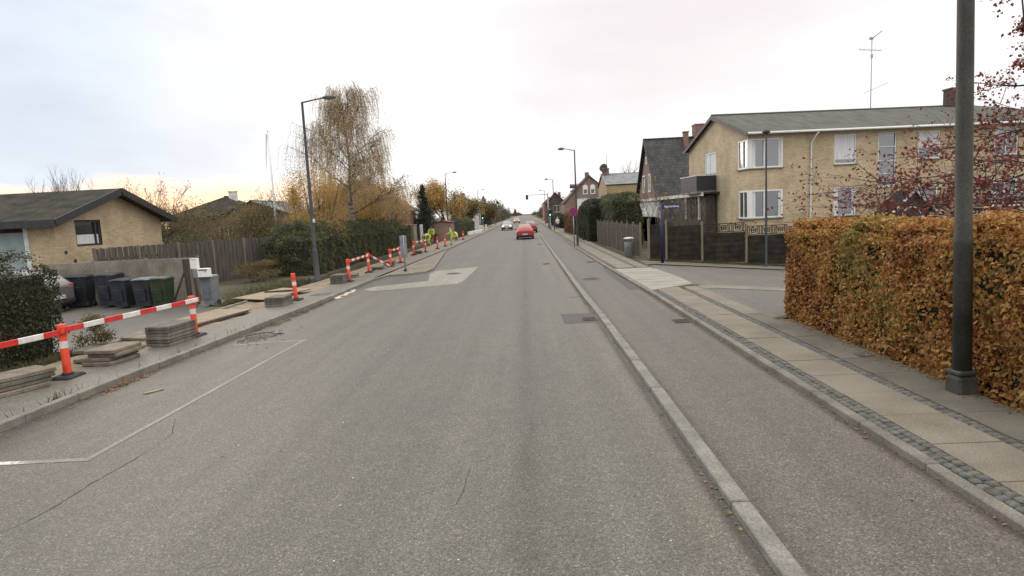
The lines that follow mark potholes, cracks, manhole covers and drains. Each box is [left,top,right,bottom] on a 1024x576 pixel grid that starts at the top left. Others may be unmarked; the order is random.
pothole [237,332,284,344]
crack [2,419,176,533]
